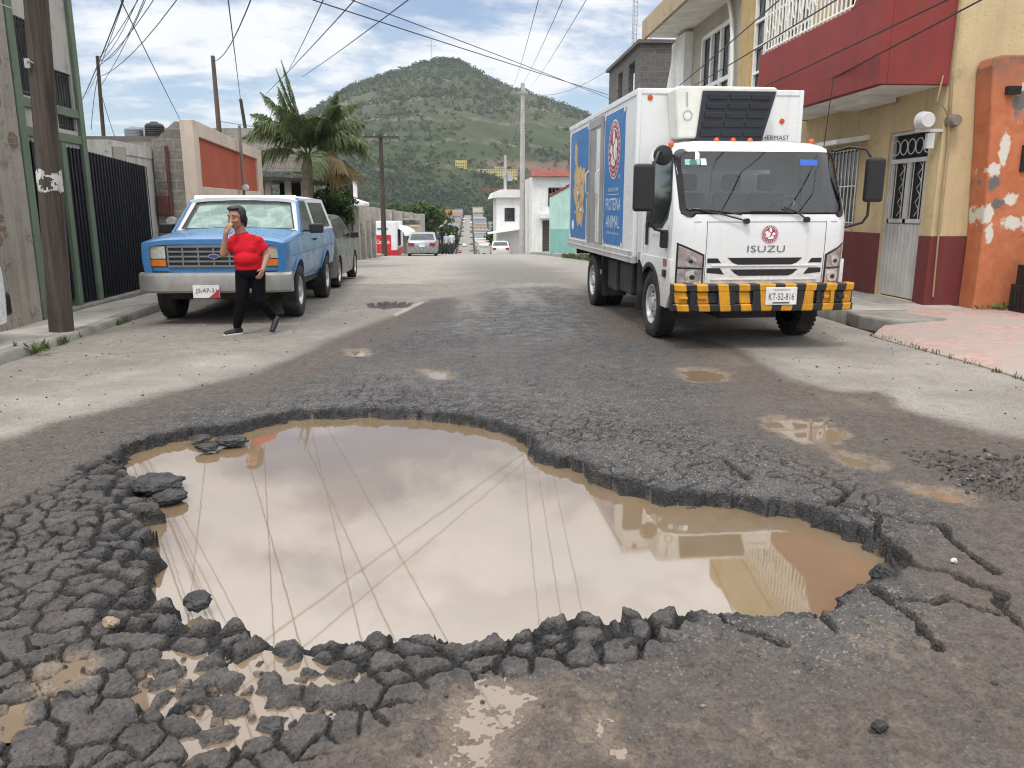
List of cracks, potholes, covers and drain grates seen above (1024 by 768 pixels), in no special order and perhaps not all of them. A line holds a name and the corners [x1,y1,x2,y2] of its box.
pothole [887,478,988,508]
pothole [670,365,736,383]
pothole [417,368,459,380]
pothole [366,301,413,309]
crack [0,374,1024,768]
pothole [339,347,377,358]
pothole [106,406,920,656]
